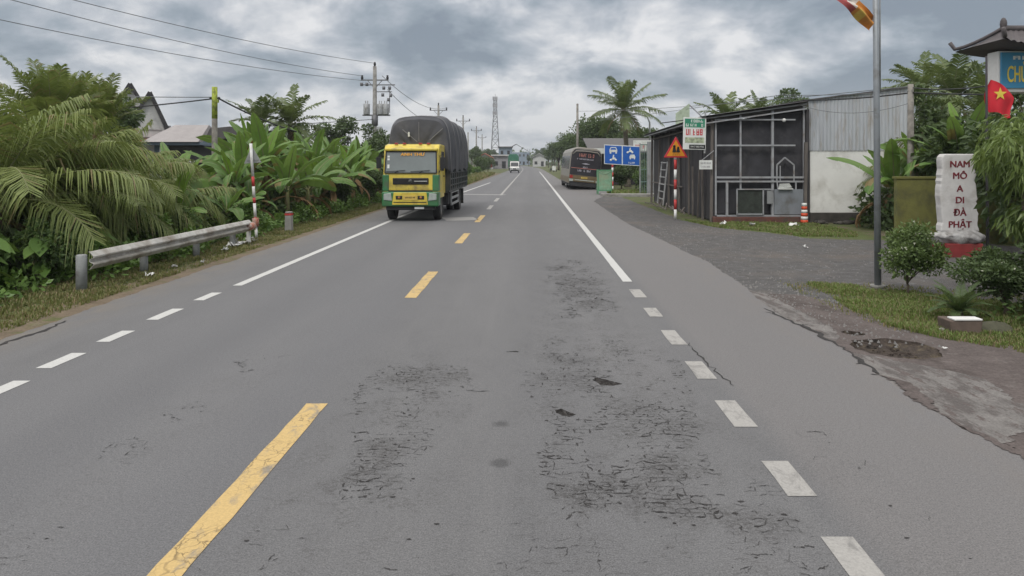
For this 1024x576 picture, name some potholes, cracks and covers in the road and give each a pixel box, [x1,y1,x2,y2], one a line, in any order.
pothole [593,377,622,386]
crack [544,260,618,319]
crack [339,365,475,502]
crack [0,321,65,345]
crack [494,338,831,576]
pothole [850,338,943,359]
crack [764,308,1024,459]
